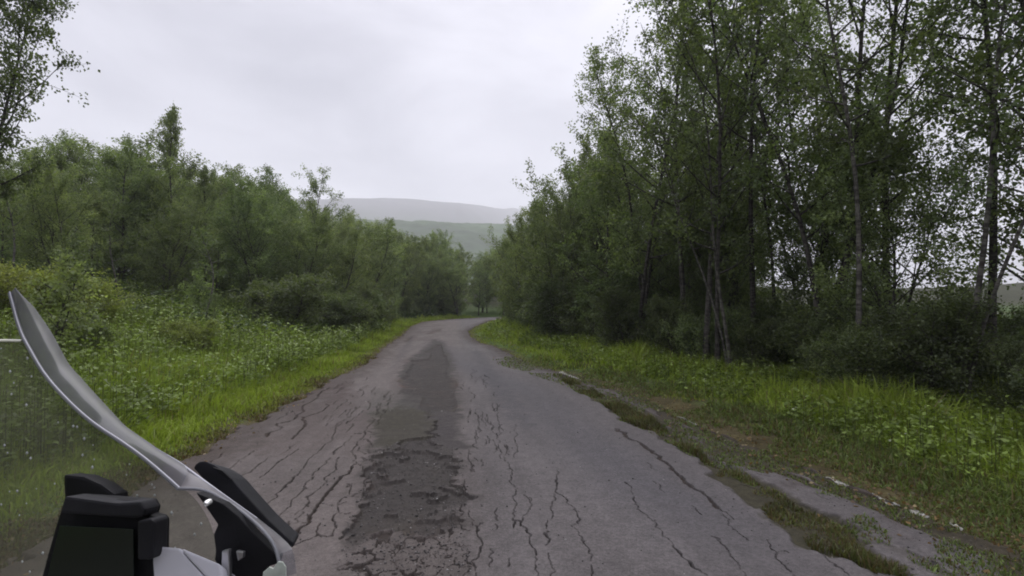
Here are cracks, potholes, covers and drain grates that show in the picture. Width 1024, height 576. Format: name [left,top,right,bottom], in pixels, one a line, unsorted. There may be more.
crack [614,428,749,576]
crack [211,369,594,576]
